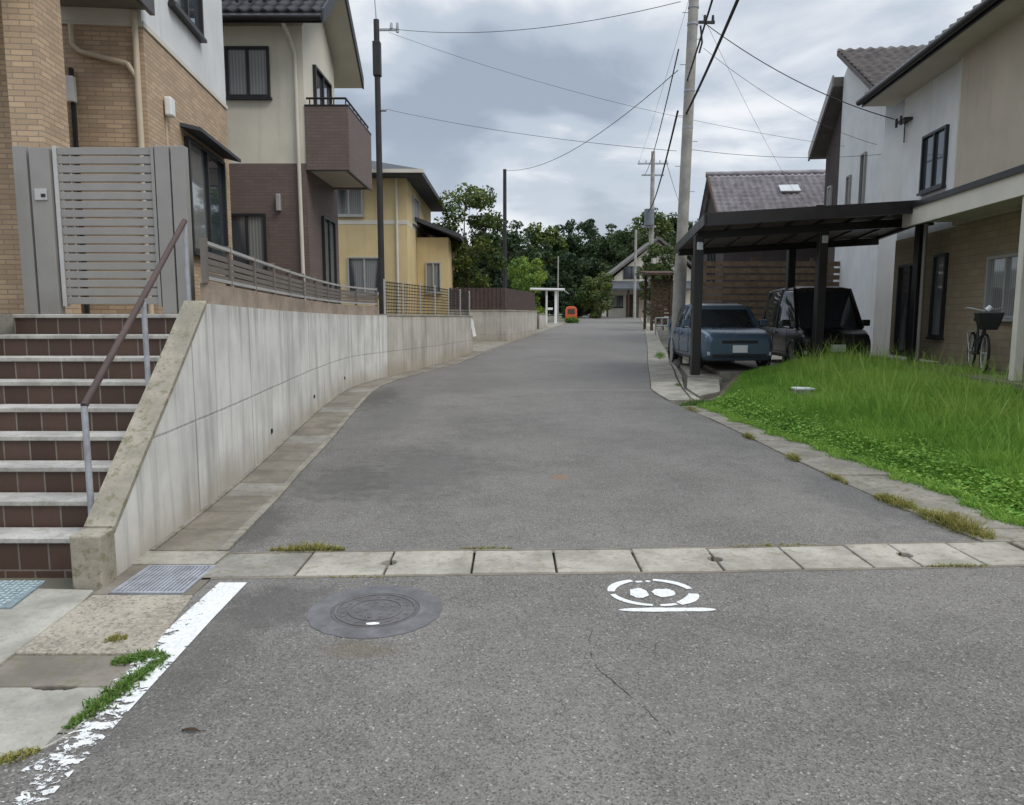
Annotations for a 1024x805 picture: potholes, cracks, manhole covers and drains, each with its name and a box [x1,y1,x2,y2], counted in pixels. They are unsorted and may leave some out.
drain grate [109,565,216,595]
crack [589,630,671,735]
manhole cover [307,585,443,639]
